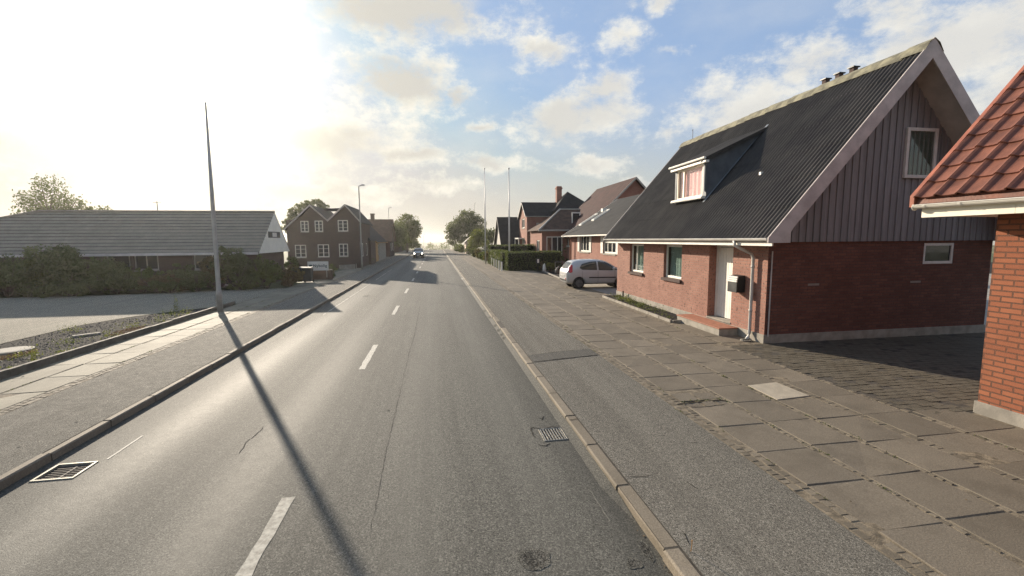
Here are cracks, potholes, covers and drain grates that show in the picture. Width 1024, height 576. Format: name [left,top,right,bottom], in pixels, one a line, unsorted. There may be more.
drain grate [29,461,99,482]
drain grate [538,427,568,442]
pothole [517,548,551,571]
pothole [626,557,644,569]
